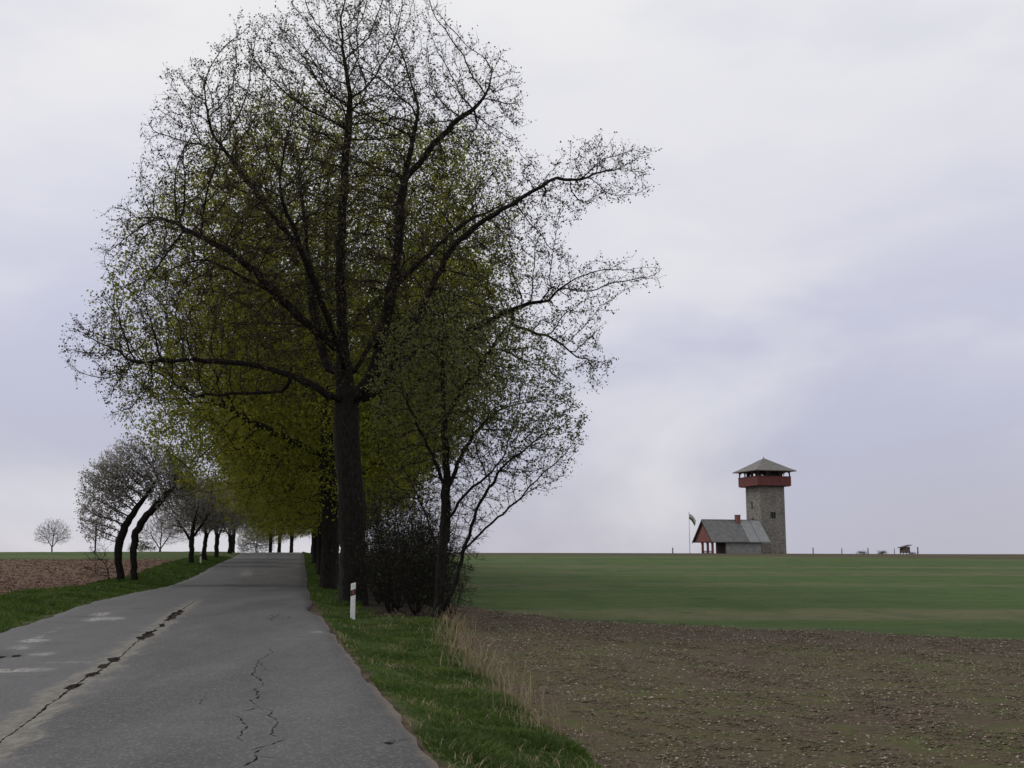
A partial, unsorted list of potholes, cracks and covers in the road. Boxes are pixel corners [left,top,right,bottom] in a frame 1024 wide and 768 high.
crack [234,650,292,767]
crack [0,599,197,743]
